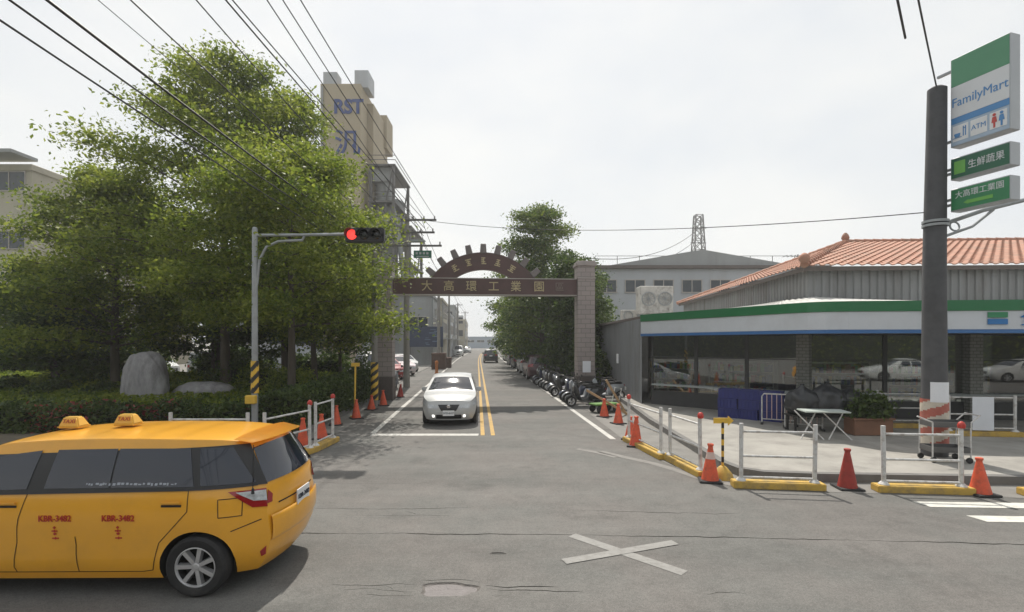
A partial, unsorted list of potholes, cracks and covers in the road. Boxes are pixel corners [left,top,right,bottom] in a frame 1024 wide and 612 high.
pothole [421,582,481,597]
crack [333,579,579,596]
